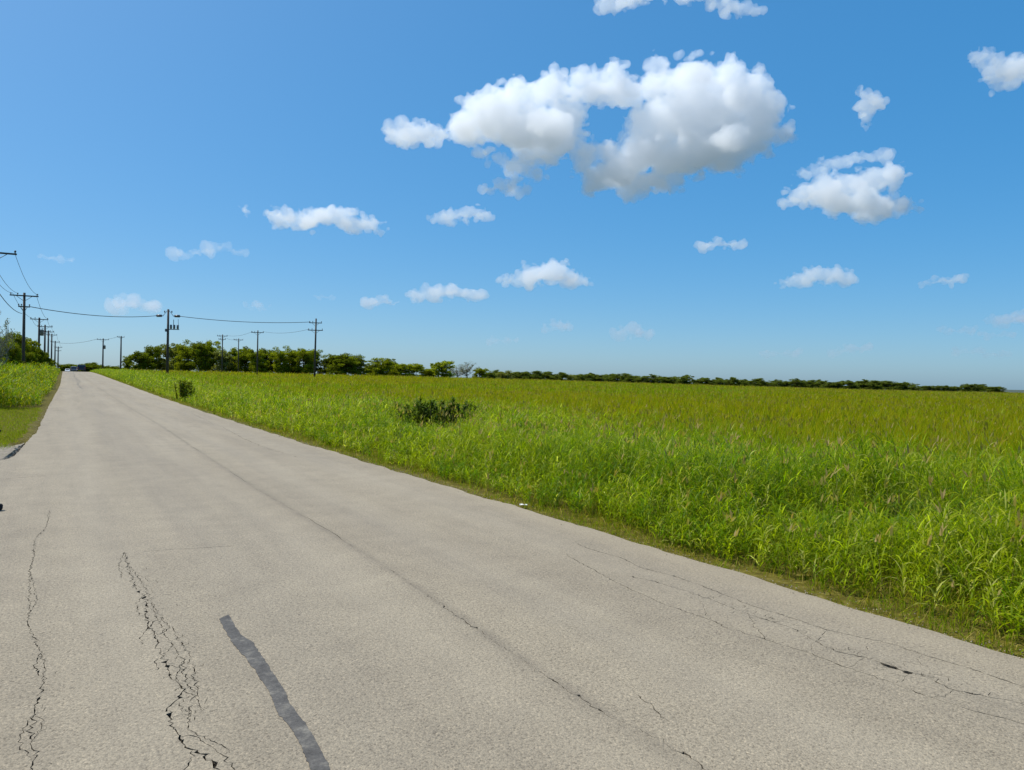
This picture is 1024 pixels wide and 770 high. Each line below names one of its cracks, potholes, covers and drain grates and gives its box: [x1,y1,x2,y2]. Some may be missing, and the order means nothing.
crack [18,515,51,769]
crack [122,552,235,770]
crack [569,550,1023,718]
